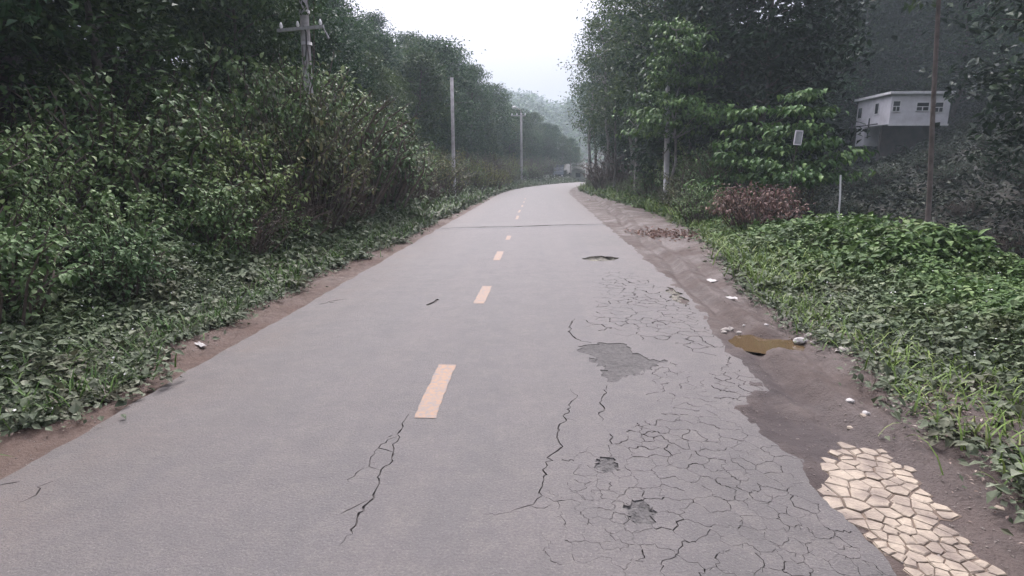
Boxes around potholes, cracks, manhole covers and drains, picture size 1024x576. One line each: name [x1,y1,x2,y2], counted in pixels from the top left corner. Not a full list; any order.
crack [341,414,409,543]
pothole [594,457,619,473]
pothole [623,499,657,525]
crack [485,389,578,515]
crack [534,362,1008,576]
crack [567,271,715,355]
